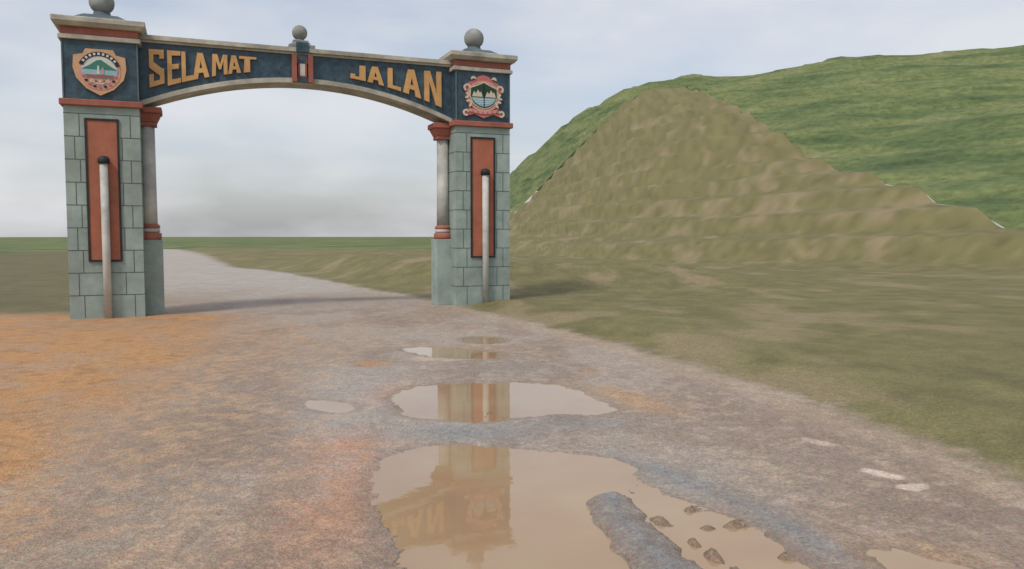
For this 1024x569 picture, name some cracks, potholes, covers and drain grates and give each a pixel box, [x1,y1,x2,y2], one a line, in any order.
pothole [456,335,515,344]
pothole [356,441,664,569]
pothole [400,346,512,360]
pothole [616,483,840,569]
pothole [294,398,367,414]
pothole [848,540,994,569]
pothole [383,379,624,424]
